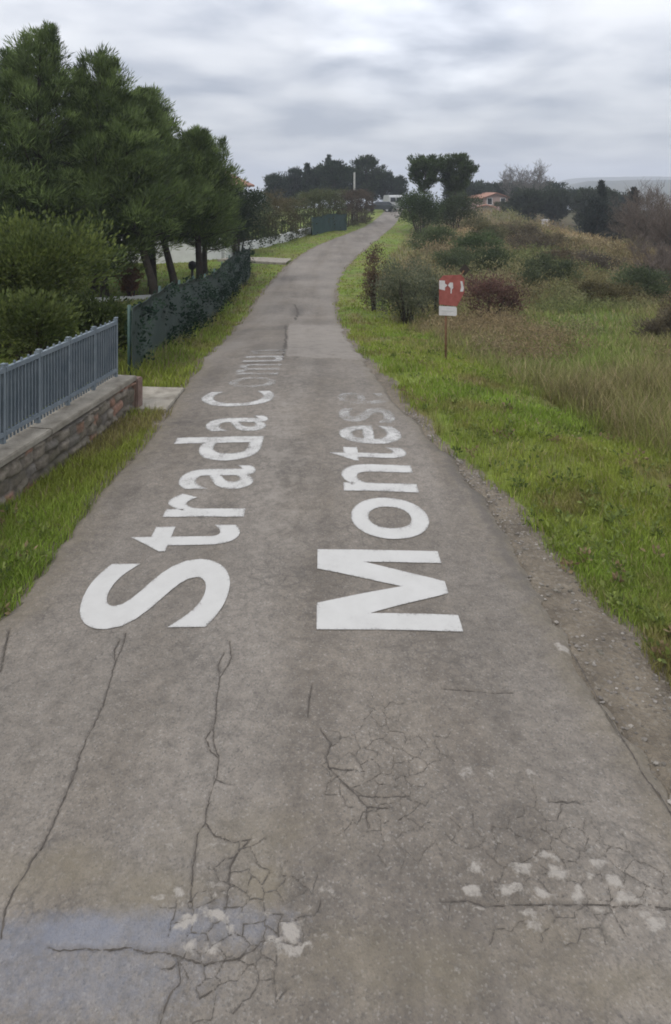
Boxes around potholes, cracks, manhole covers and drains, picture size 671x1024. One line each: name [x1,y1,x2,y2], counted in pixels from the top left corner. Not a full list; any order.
crack [307,686,455,874]
crack [442,786,671,945]
crack [1,633,126,939]
crack [48,641,321,1023]
